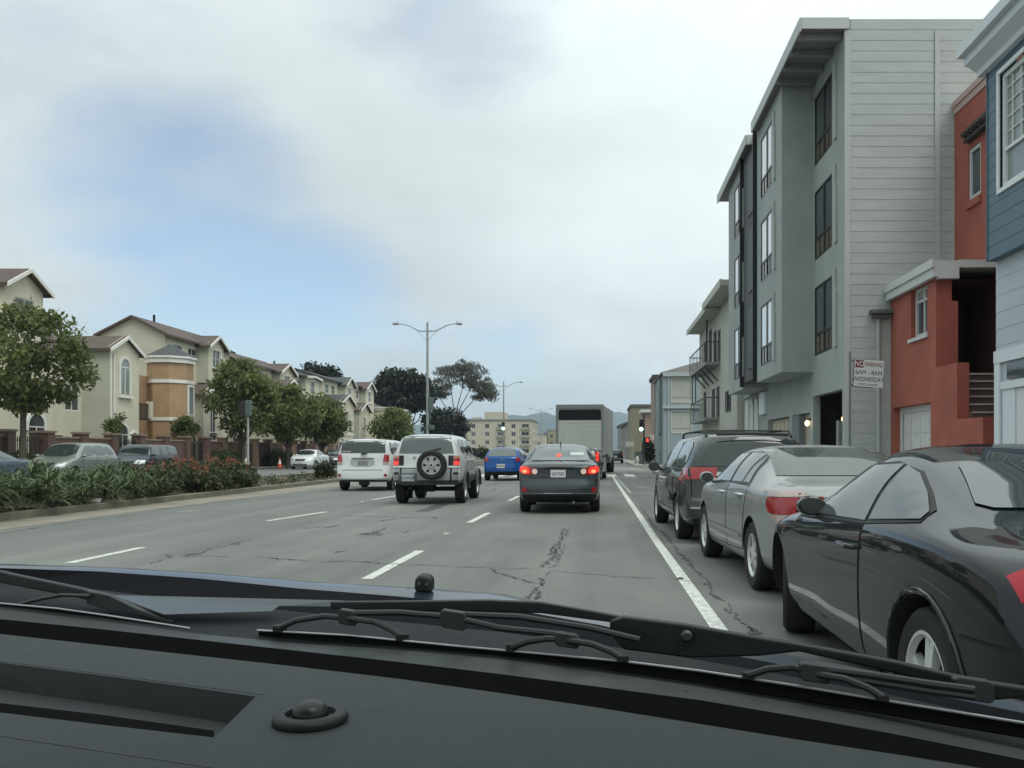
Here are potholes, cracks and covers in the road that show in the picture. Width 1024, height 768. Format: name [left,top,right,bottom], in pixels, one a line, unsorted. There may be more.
crack [200,508,762,635]
